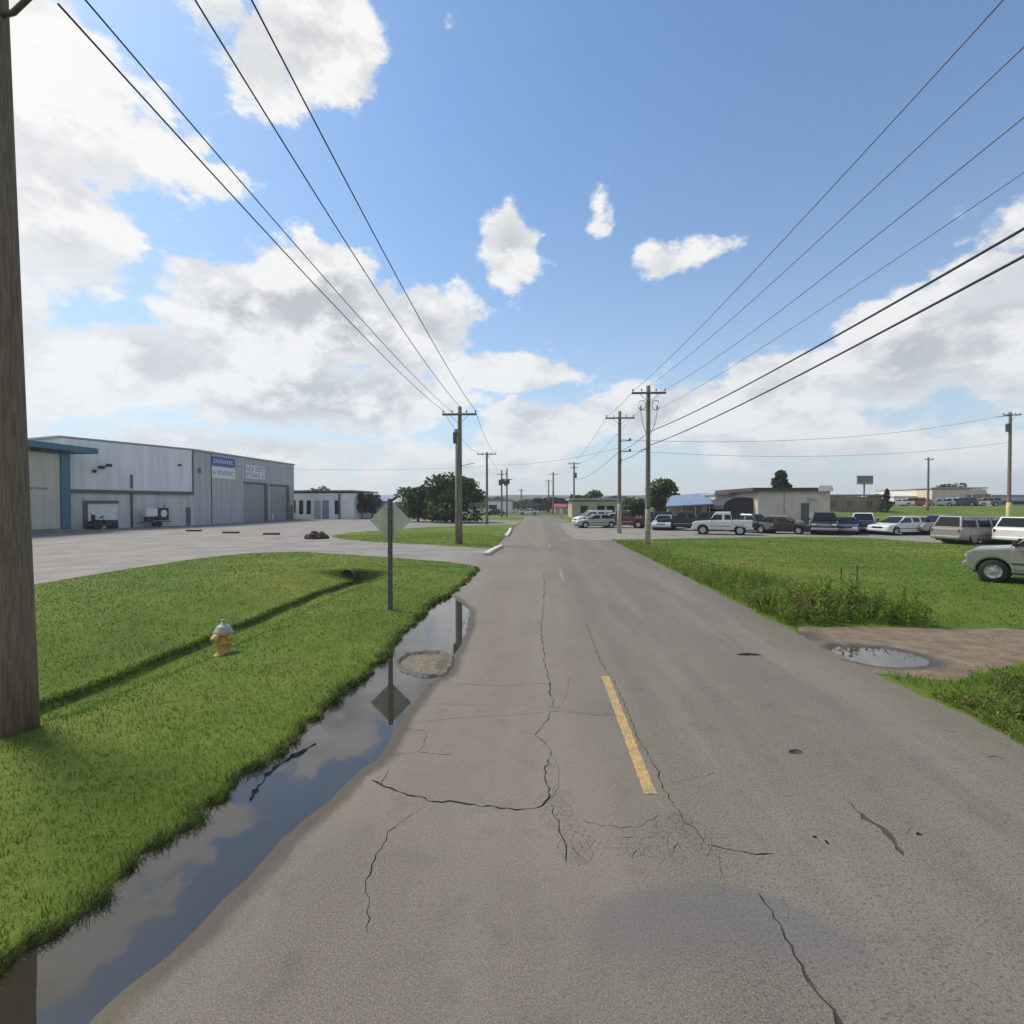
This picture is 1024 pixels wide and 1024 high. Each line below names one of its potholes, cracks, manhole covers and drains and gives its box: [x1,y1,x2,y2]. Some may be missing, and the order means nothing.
crack [585,624,774,880]
crack [365,571,608,934]
crack [848,801,912,856]
crack [758,892,843,1024]
